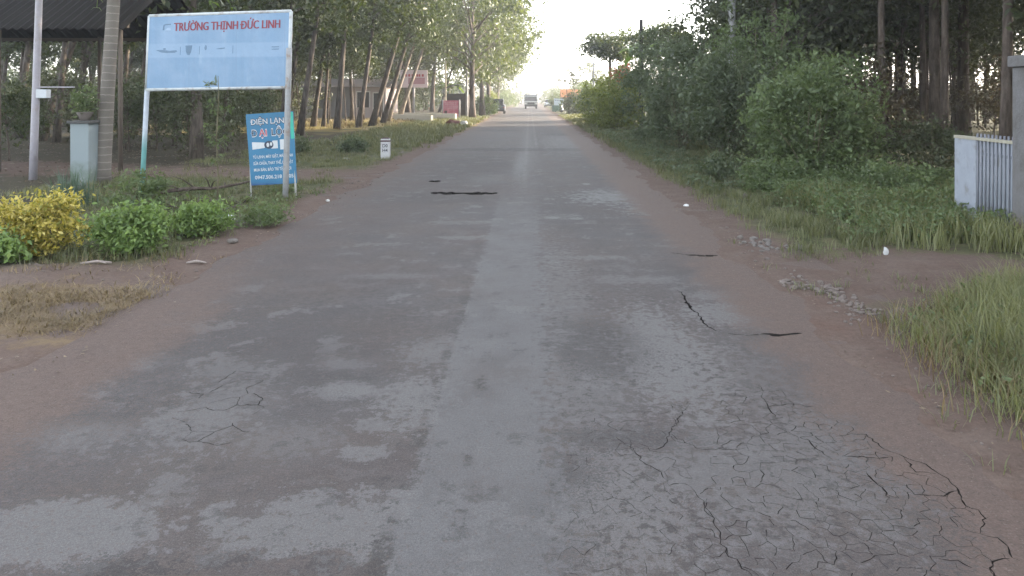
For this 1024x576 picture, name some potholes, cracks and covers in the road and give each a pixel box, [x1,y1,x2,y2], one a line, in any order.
crack [173,371,263,446]
crack [558,386,1020,576]
crack [677,290,801,337]
